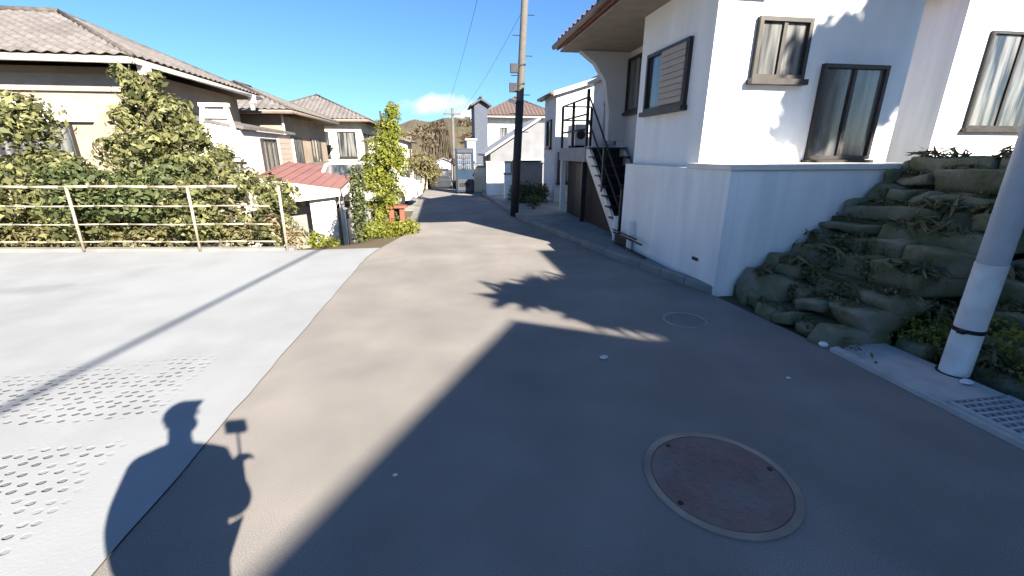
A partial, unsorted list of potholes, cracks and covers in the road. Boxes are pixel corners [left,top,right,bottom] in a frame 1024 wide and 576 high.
manhole cover [643,432,805,542]
manhole cover [662,312,707,329]
